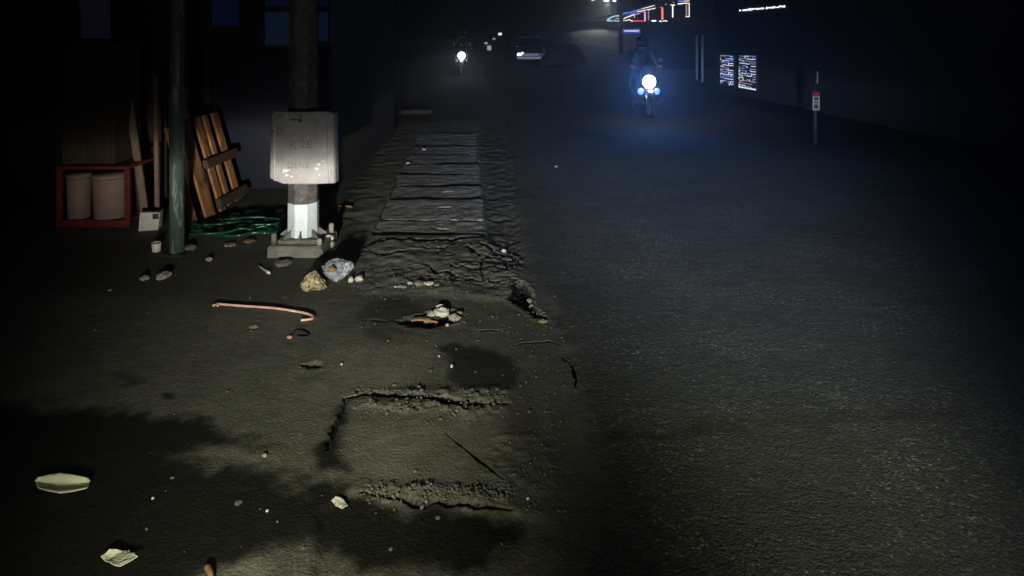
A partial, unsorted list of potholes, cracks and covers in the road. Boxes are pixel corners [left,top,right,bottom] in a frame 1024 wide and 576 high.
crack [352,234,531,287]
pothole [495,275,561,325]
crack [308,384,529,525]
